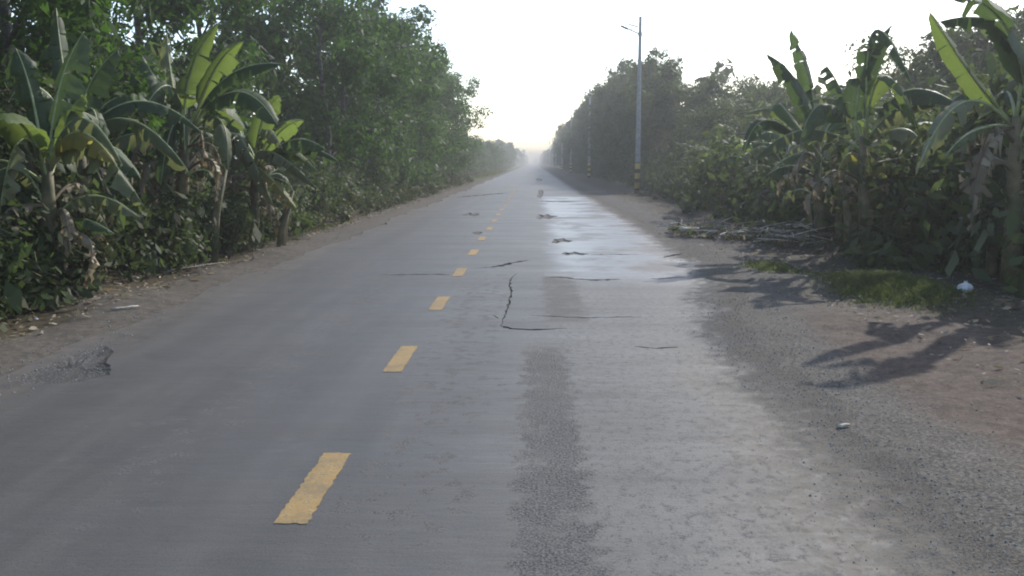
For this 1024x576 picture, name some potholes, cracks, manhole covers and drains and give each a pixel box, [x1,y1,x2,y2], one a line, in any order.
crack [481,260,607,330]
pothole [15,345,115,385]
